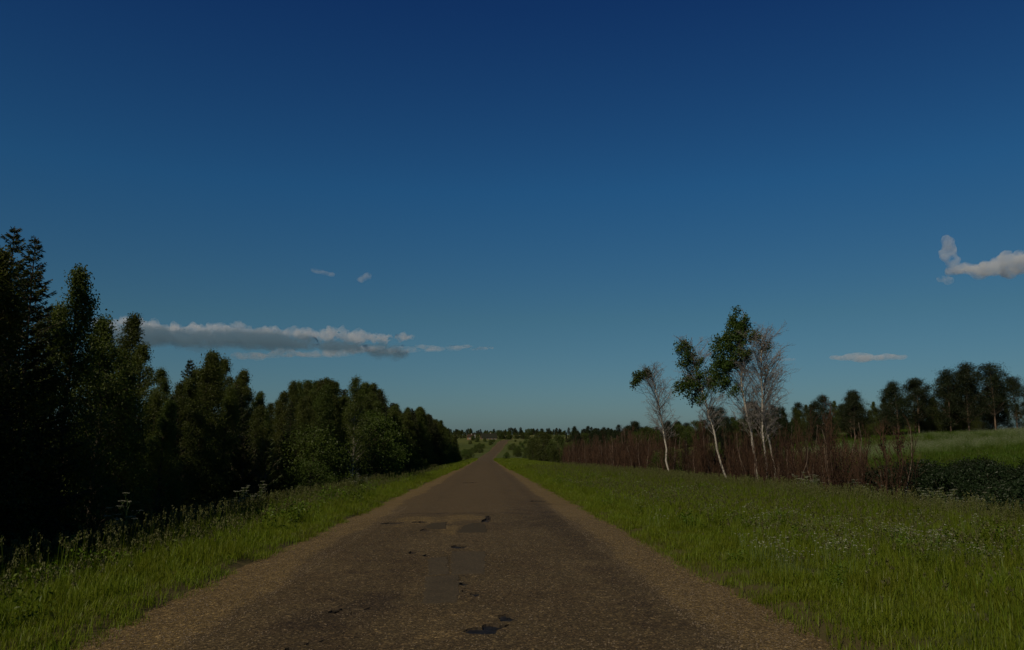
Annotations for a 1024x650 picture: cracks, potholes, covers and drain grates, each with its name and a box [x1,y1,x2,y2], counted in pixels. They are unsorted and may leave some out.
pothole [463,623,509,634]
